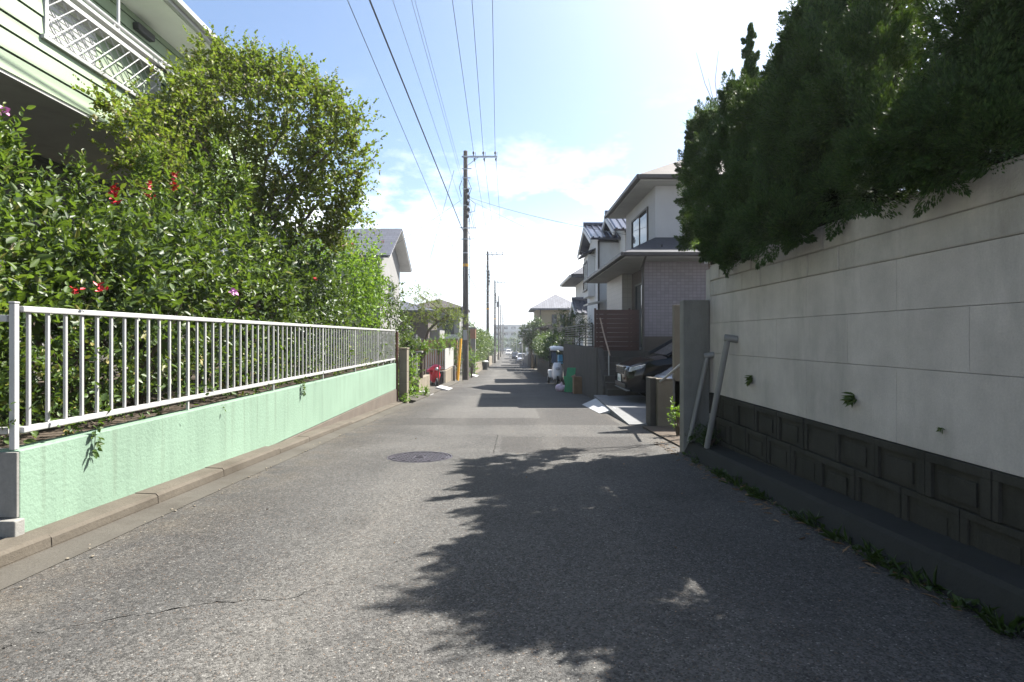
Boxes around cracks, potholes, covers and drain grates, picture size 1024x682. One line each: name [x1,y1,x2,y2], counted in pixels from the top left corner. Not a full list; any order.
manhole cover [387,451,452,463]
crack [1,556,427,649]
